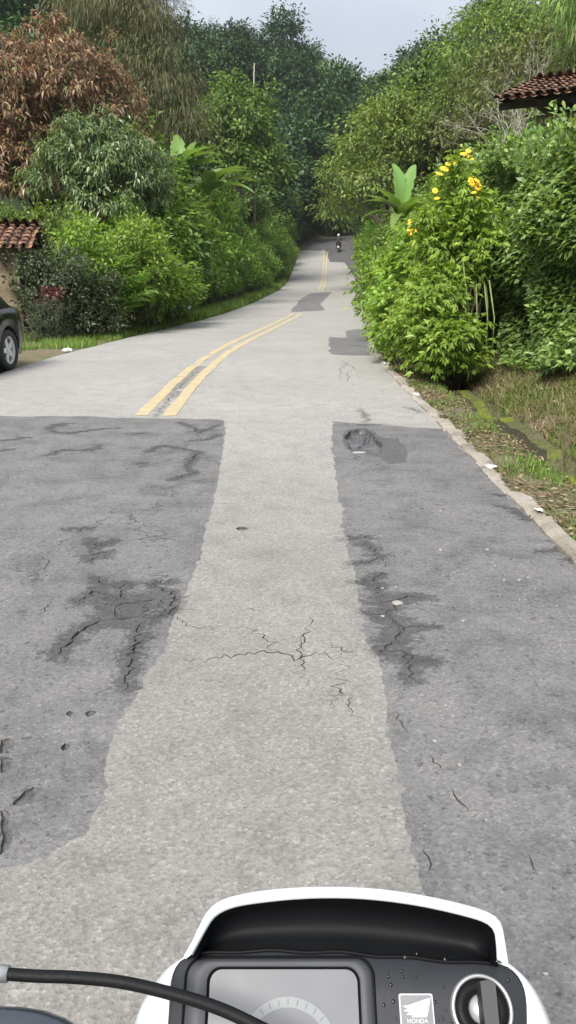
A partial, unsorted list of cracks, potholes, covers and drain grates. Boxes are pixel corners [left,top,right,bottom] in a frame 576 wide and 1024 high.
crack [17,426,214,580]
crack [349,536,432,682]
crack [39,568,213,690]
crack [177,617,366,718]
pothole [344,429,383,453]
